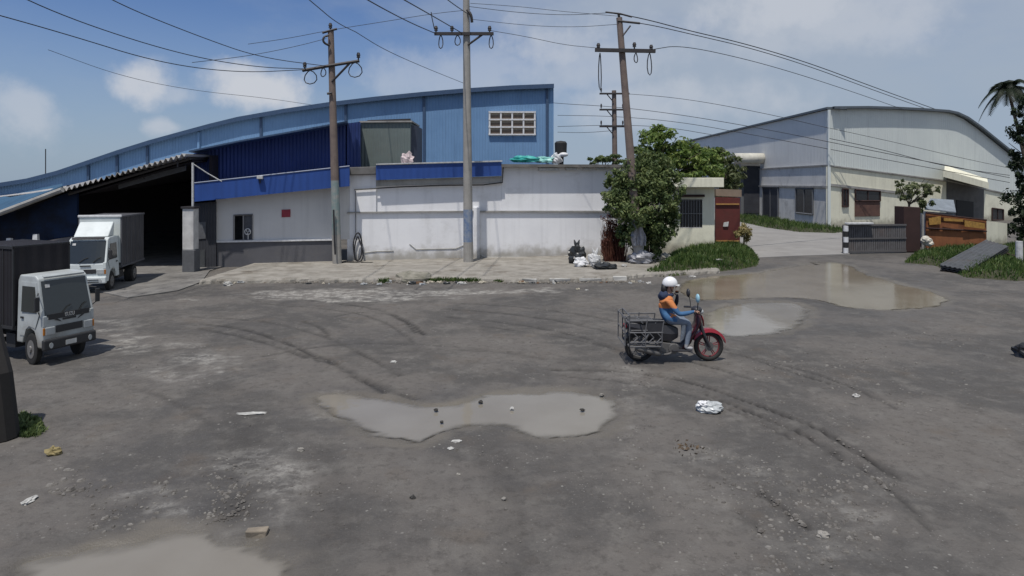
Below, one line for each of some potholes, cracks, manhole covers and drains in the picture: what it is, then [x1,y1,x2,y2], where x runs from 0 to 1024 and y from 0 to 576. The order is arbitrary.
pothole [297,386,633,450]
